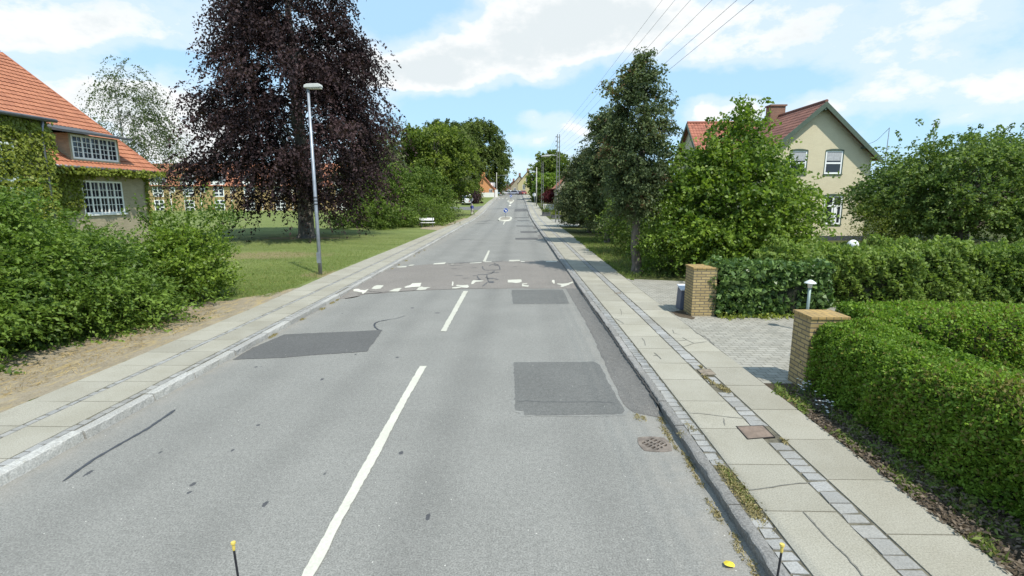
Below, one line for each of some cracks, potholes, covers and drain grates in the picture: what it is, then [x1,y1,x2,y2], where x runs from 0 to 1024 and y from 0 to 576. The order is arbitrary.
crack [365,261,498,294]
crack [803,512,864,576]
manhole cover [736,425,775,440]
crack [750,482,811,490]
